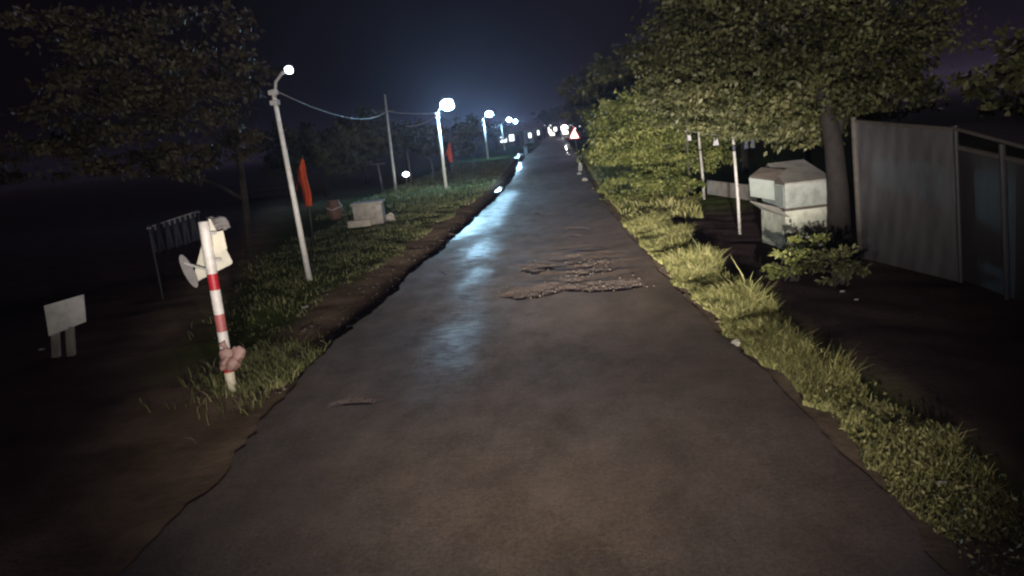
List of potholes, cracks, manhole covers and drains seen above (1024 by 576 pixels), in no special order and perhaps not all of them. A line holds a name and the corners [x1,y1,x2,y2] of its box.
pothole [497,277,644,301]
pothole [564,259,608,268]
pothole [565,268,617,276]
pothole [324,397,382,409]
pothole [521,261,557,275]
